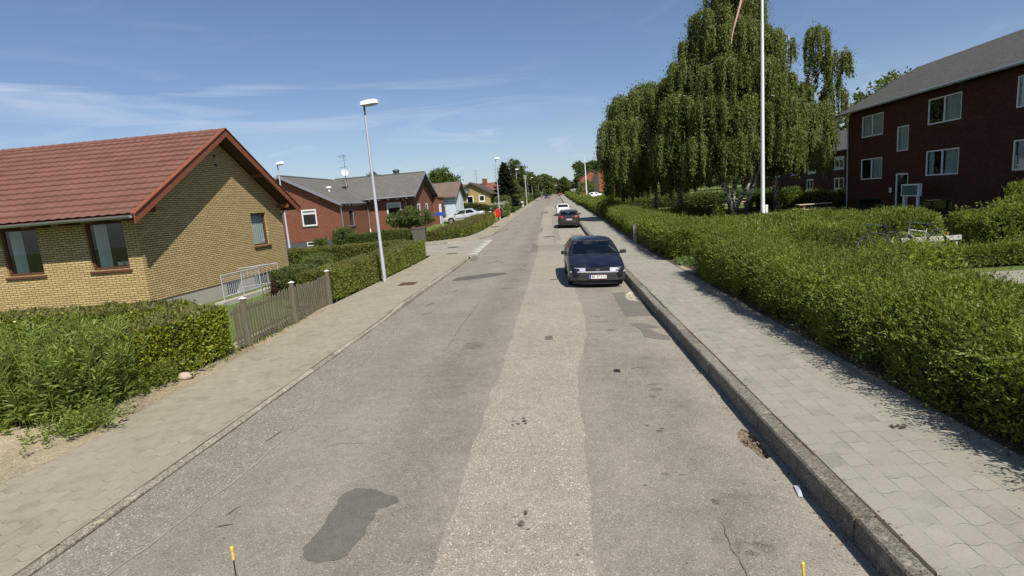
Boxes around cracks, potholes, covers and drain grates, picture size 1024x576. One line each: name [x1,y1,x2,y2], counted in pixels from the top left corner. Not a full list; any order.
pothole [737,429,771,459]
